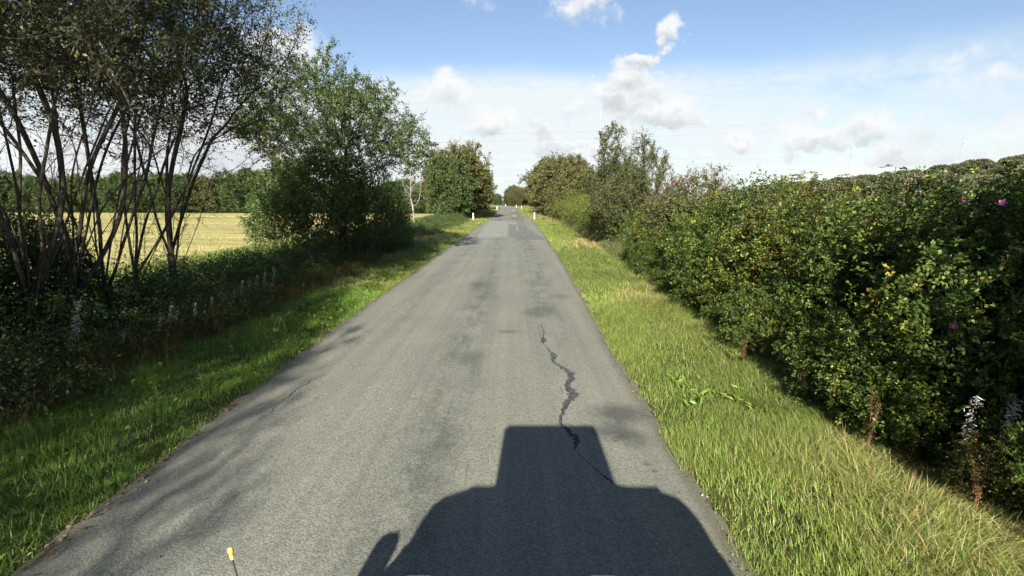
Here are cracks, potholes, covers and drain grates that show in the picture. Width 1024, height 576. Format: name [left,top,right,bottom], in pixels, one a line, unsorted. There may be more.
crack [540,325,620,487]
